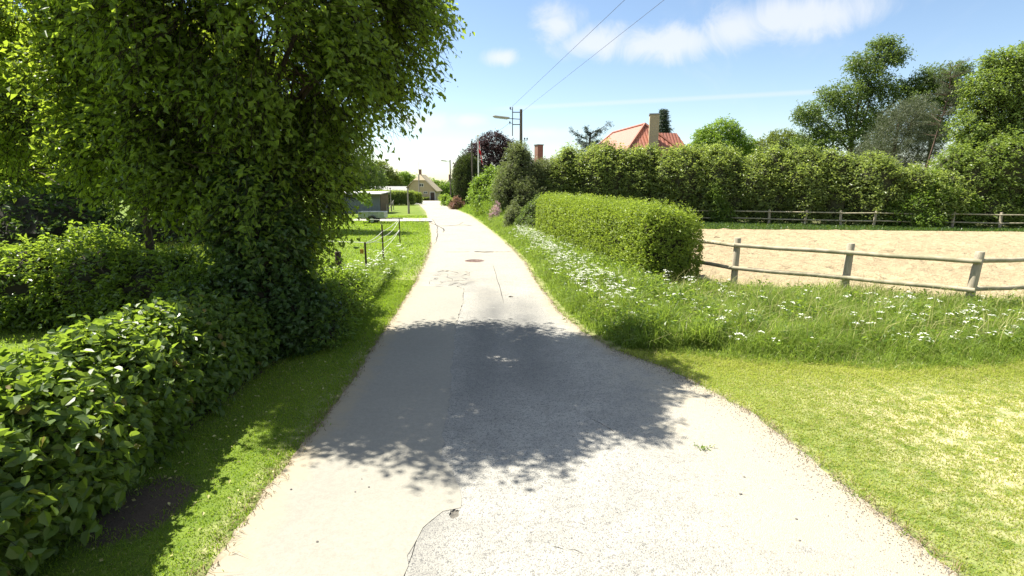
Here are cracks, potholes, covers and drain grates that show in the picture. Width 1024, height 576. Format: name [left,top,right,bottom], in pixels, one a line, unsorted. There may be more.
crack [429,270,470,319]
